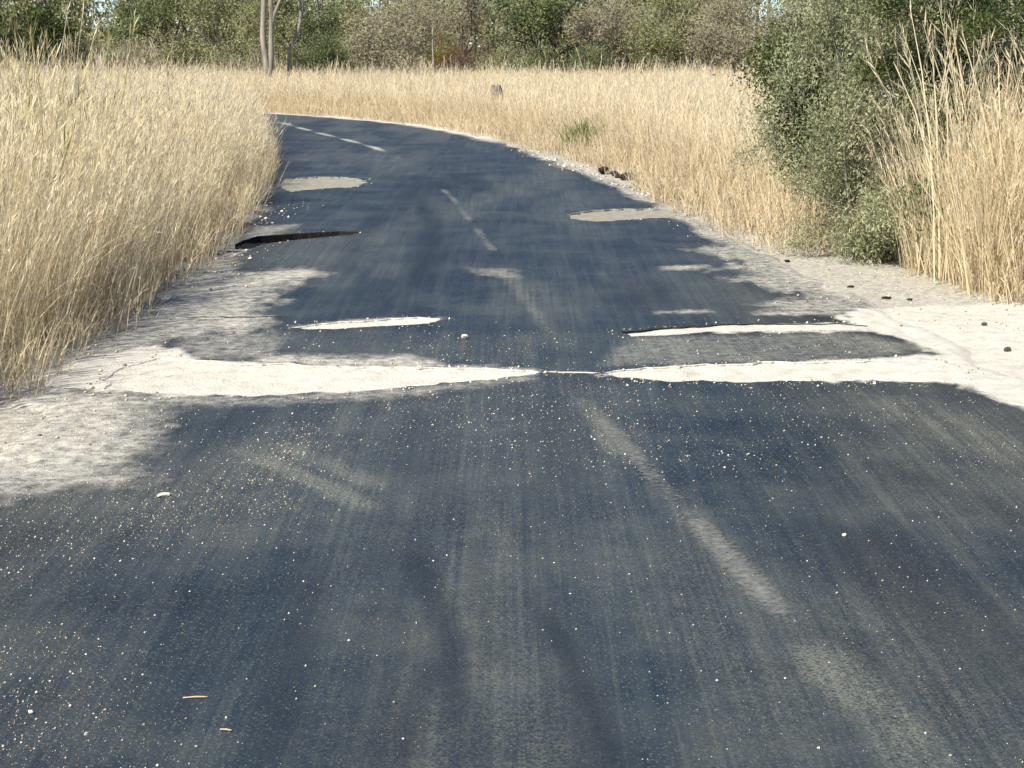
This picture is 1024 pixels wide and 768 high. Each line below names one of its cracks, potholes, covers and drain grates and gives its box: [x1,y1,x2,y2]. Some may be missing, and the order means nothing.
pothole [560,208,690,222]
pothole [282,316,447,331]
pothole [92,357,547,399]
pothole [612,322,875,338]
pothole [270,177,372,193]
pothole [224,231,370,252]
pothole [592,359,976,385]
